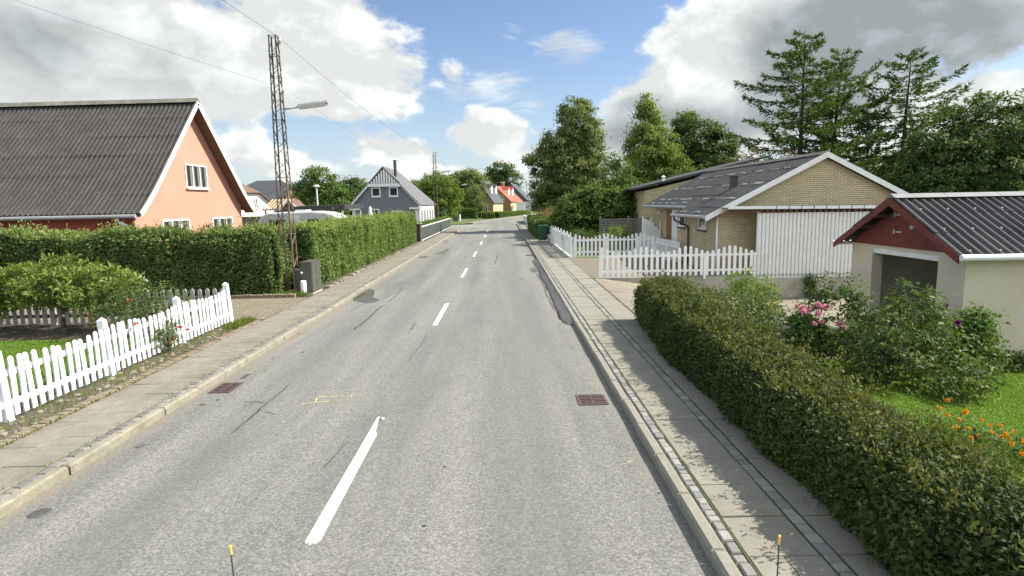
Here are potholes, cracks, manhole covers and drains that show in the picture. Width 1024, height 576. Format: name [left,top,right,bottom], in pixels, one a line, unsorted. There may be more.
drain grate [576,394,609,406]
crack [234,386,287,432]
manhole cover [27,507,53,518]
drain grate [207,382,244,394]
